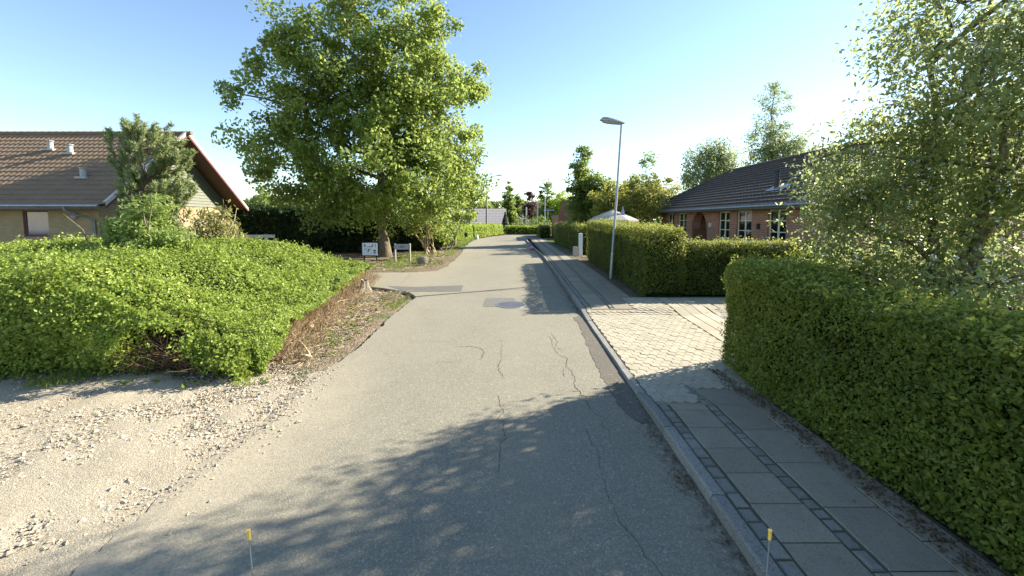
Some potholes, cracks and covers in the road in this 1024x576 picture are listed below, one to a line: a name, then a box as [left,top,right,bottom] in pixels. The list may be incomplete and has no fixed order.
crack [552,334,663,576]
